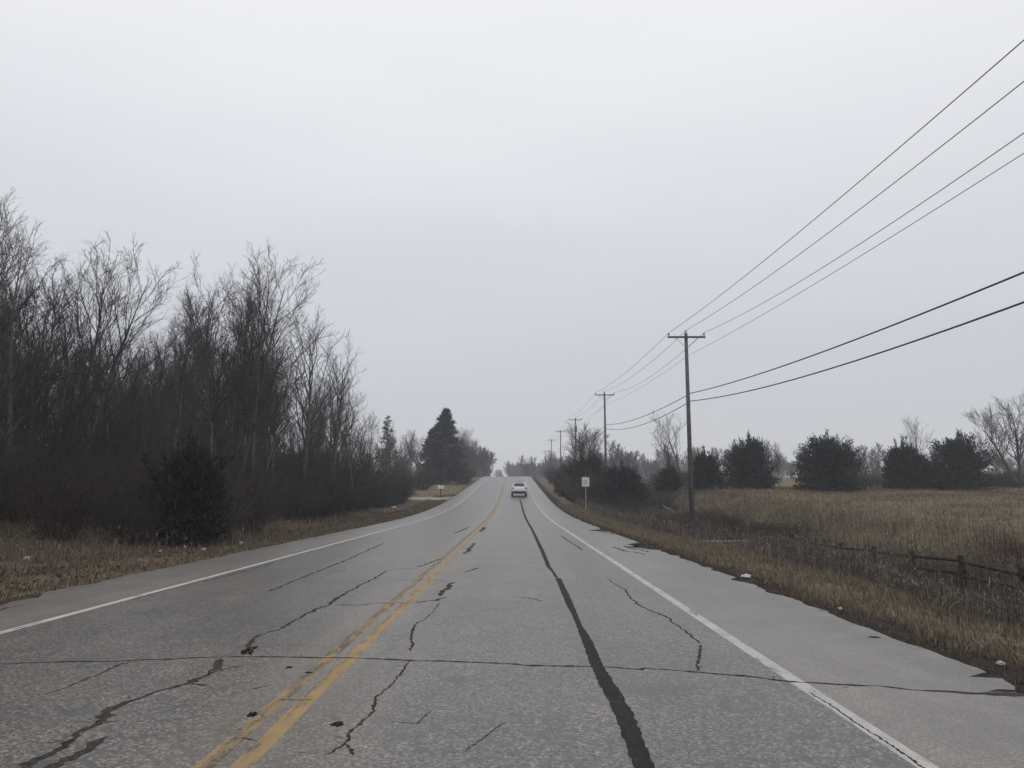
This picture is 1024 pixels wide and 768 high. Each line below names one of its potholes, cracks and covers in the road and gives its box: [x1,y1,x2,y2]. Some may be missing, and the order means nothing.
crack [5,543,1024,768]
